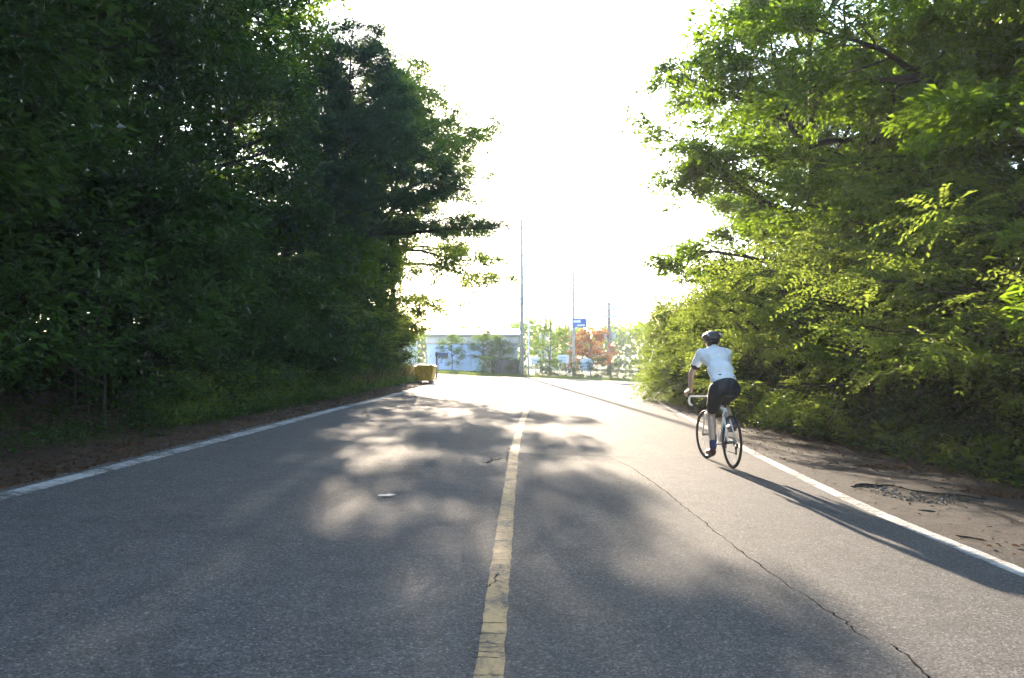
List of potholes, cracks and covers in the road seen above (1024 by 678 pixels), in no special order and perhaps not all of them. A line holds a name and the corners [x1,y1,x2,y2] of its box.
pothole [853,483,986,504]
crack [615,459,930,678]
